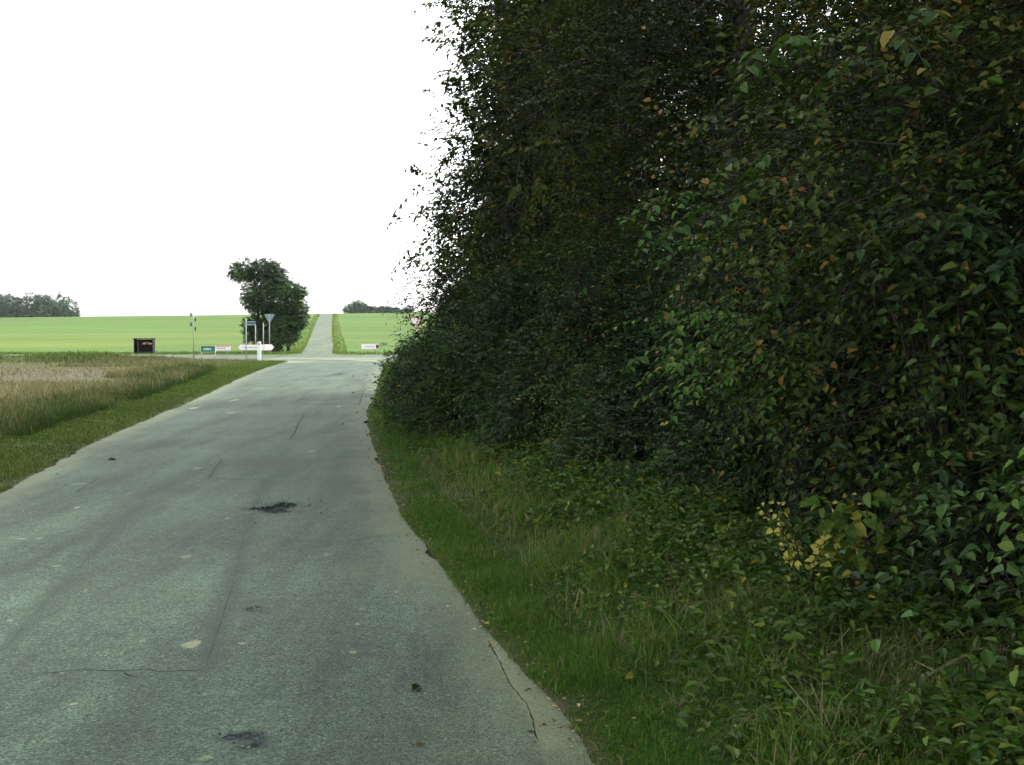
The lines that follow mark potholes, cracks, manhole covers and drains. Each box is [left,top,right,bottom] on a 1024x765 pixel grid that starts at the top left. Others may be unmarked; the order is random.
crack [51,460,265,677]
pothole [205,714,287,752]
pothole [240,493,328,523]
crack [487,641,538,739]
